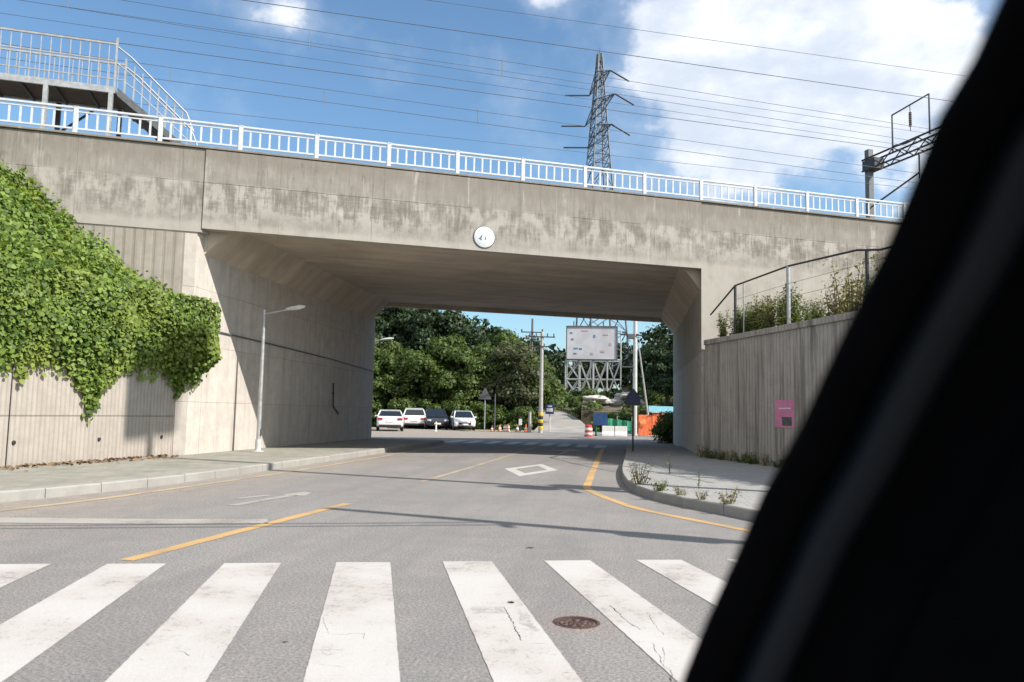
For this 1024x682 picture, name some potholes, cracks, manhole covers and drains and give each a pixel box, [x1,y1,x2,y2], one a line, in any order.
manhole cover [553,616,600,629]
crack [610,606,673,682]
